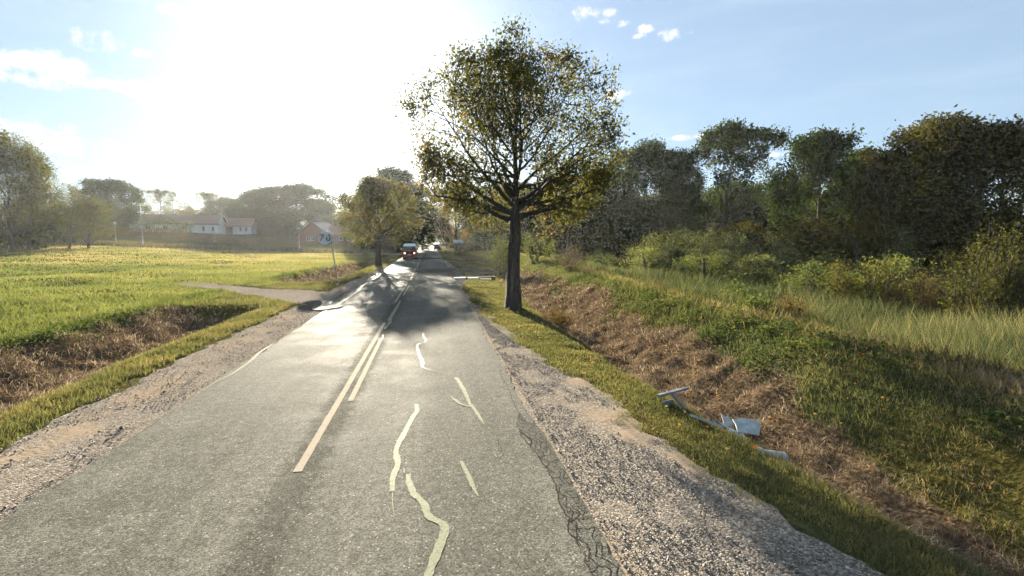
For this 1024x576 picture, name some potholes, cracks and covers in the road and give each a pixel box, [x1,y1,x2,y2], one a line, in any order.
pothole [298,299,344,310]
crack [442,329,626,576]
